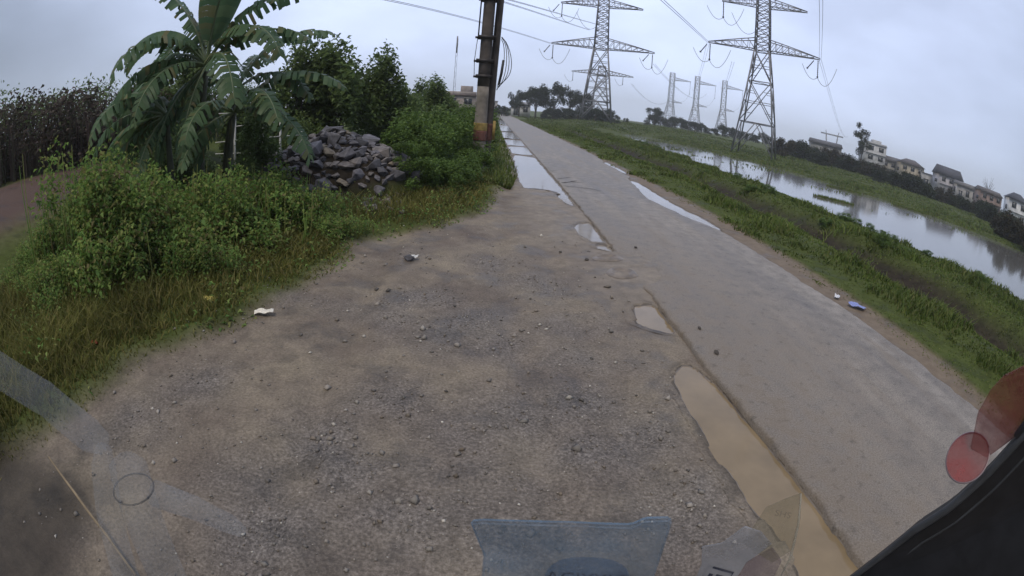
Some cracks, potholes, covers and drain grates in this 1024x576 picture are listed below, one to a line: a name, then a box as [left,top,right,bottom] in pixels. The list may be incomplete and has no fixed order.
pothole [511,154,576,206]
pothole [623,300,680,336]
pothole [569,221,605,243]
pothole [666,359,858,576]
